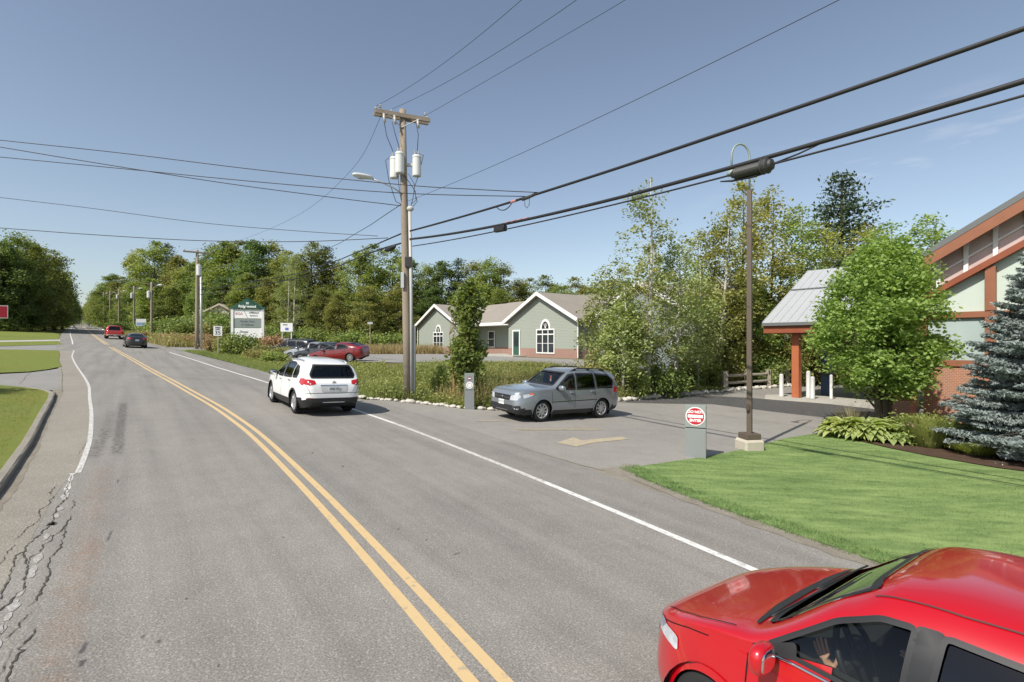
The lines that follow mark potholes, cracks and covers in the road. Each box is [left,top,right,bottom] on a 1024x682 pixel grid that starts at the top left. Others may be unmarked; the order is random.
crack [0,440,88,682]
